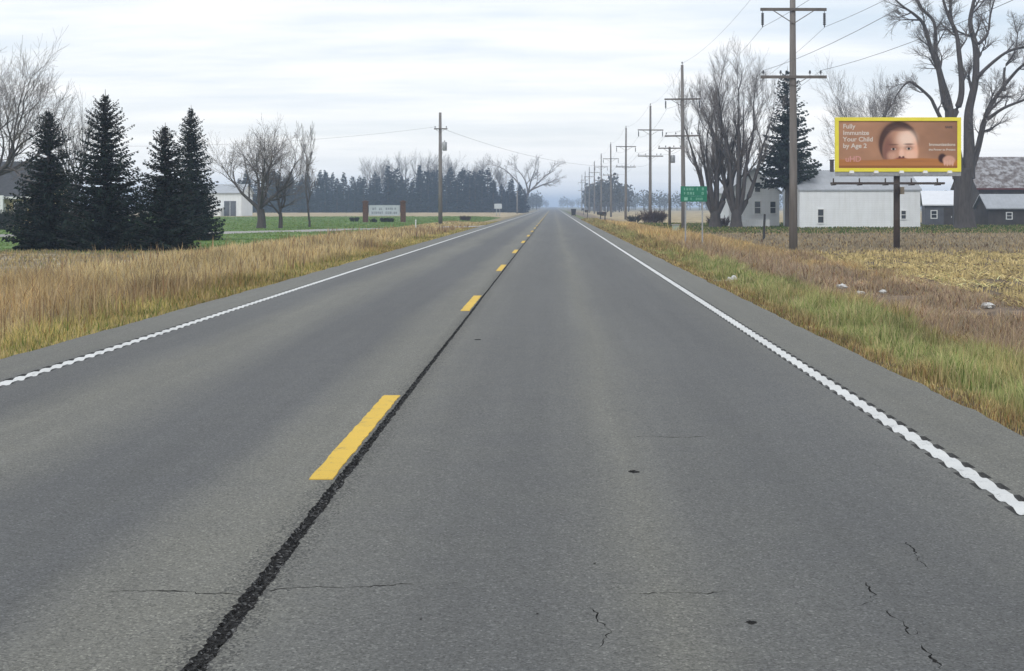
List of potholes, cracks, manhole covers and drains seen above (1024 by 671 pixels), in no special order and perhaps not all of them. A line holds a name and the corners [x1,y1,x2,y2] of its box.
crack [112,583,403,596]
crack [862,583,942,669]
